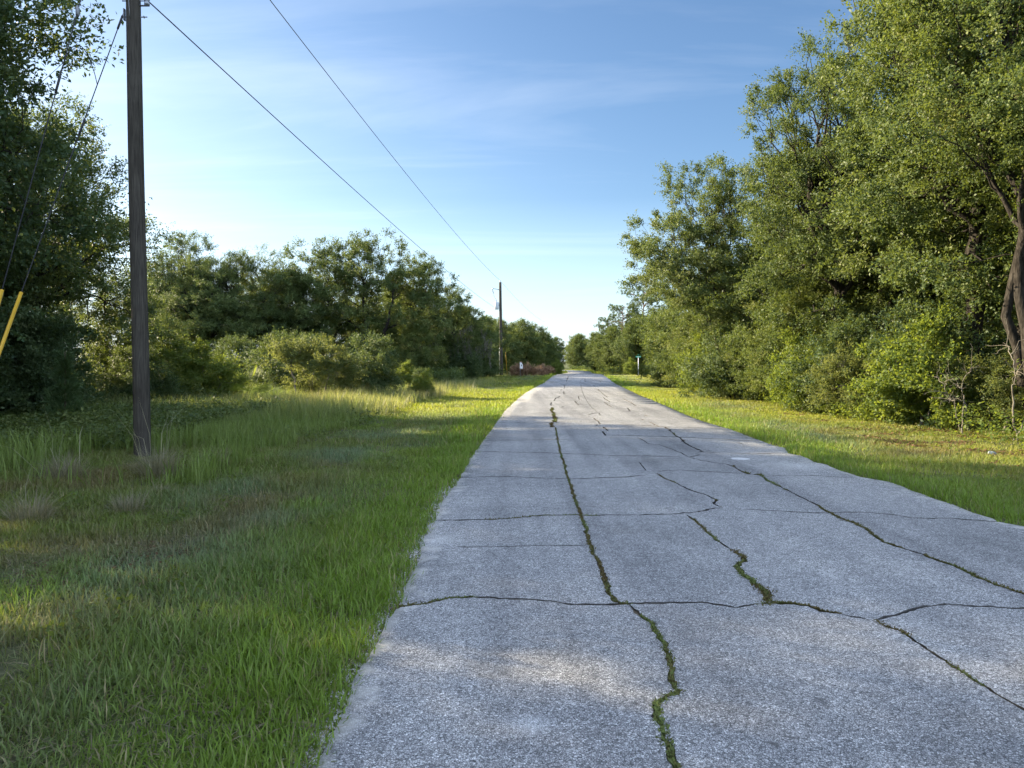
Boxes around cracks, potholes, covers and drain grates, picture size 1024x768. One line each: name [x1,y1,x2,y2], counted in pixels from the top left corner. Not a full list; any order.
crack [391,376,1024,768]
